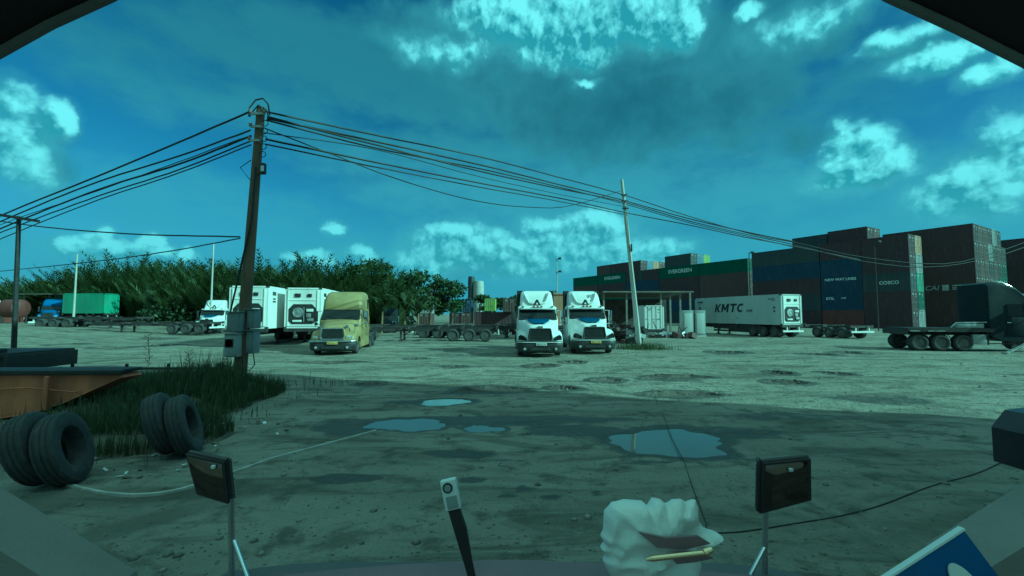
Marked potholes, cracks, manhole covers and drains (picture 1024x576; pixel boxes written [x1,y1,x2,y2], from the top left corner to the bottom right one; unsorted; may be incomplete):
pothole [756,378,822,386]
pothole [634,373,724,382]
pothole [628,389,734,399]
pothole [583,376,630,384]
